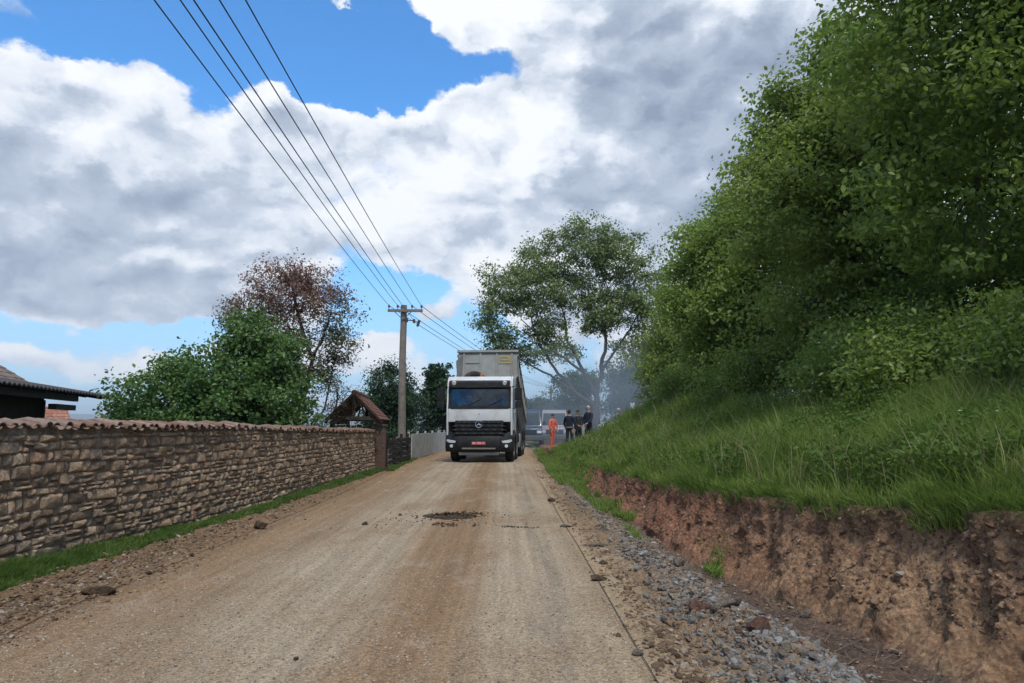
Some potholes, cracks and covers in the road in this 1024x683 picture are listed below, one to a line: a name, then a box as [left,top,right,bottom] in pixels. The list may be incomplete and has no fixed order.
pothole [395,510,489,521]
